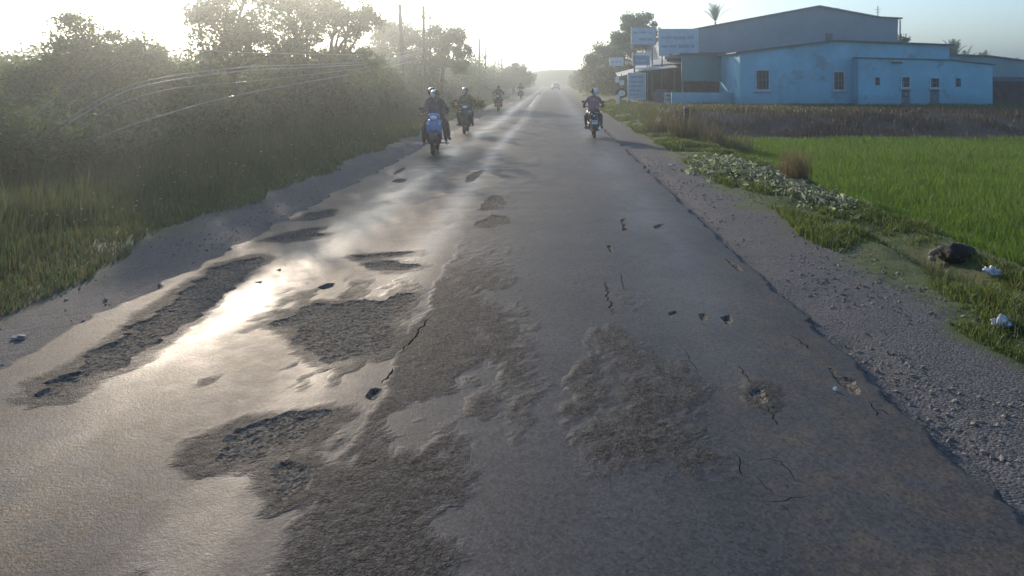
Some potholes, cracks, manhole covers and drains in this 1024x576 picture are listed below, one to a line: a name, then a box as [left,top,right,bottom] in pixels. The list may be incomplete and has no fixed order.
pothole [206,409,335,468]
pothole [476,195,507,211]
pothole [268,292,415,364]
pothole [352,251,413,259]
pothole [269,460,313,500]
crack [382,316,432,383]
crack [604,272,625,316]
pothole [820,361,860,394]
crack [735,453,806,511]
pothole [746,387,768,404]
pothole [472,214,512,229]
pothole [31,256,266,398]
